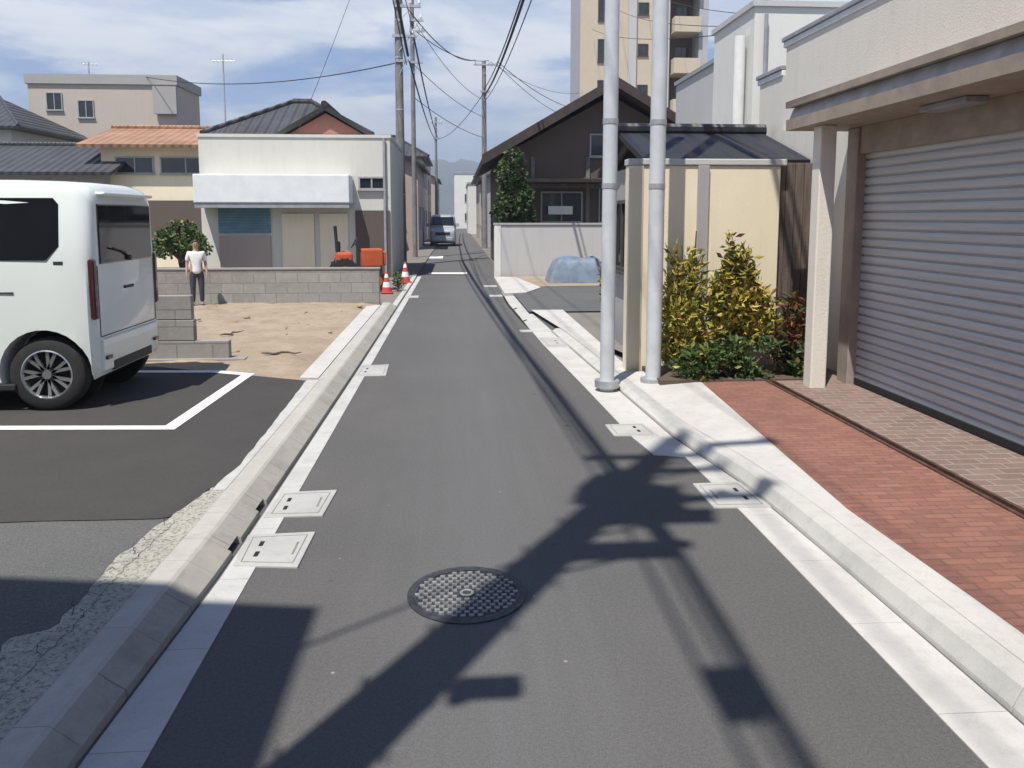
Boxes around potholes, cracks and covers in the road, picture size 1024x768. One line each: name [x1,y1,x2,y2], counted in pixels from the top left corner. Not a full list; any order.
crack [0,499,197,699]
manhole cover [407,566,526,625]
